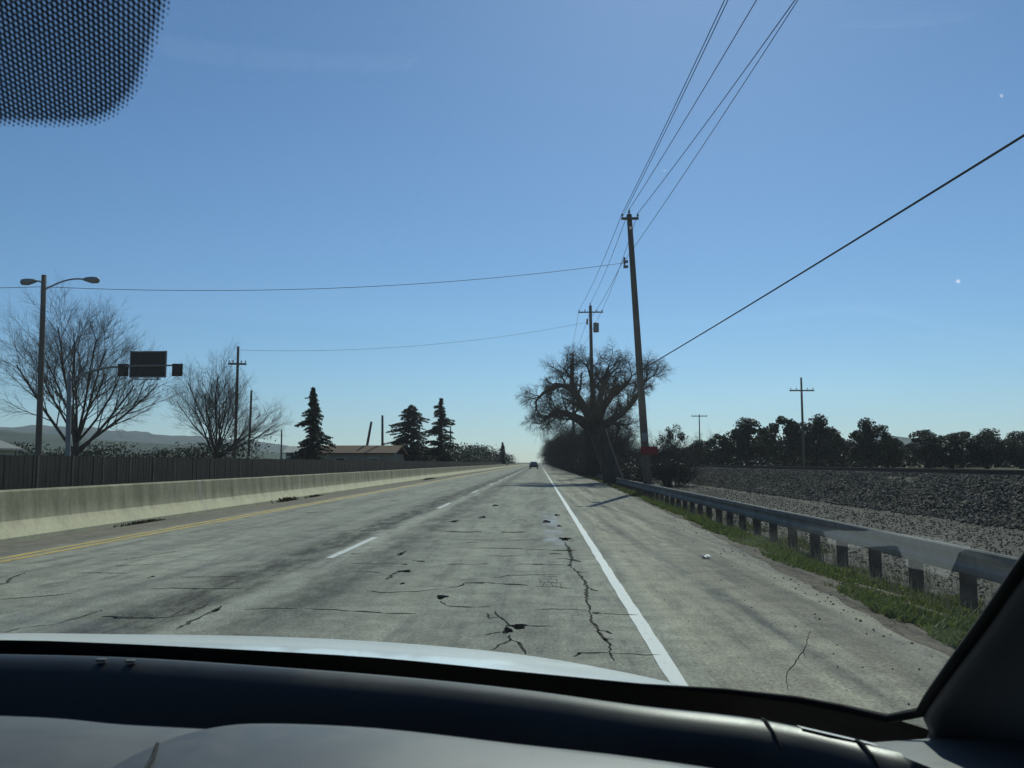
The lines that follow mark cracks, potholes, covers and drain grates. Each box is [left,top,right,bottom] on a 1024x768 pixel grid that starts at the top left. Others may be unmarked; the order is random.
crack [351,532,628,654]
crack [0,573,240,632]
crack [573,652,644,661]
crack [786,631,811,690]
